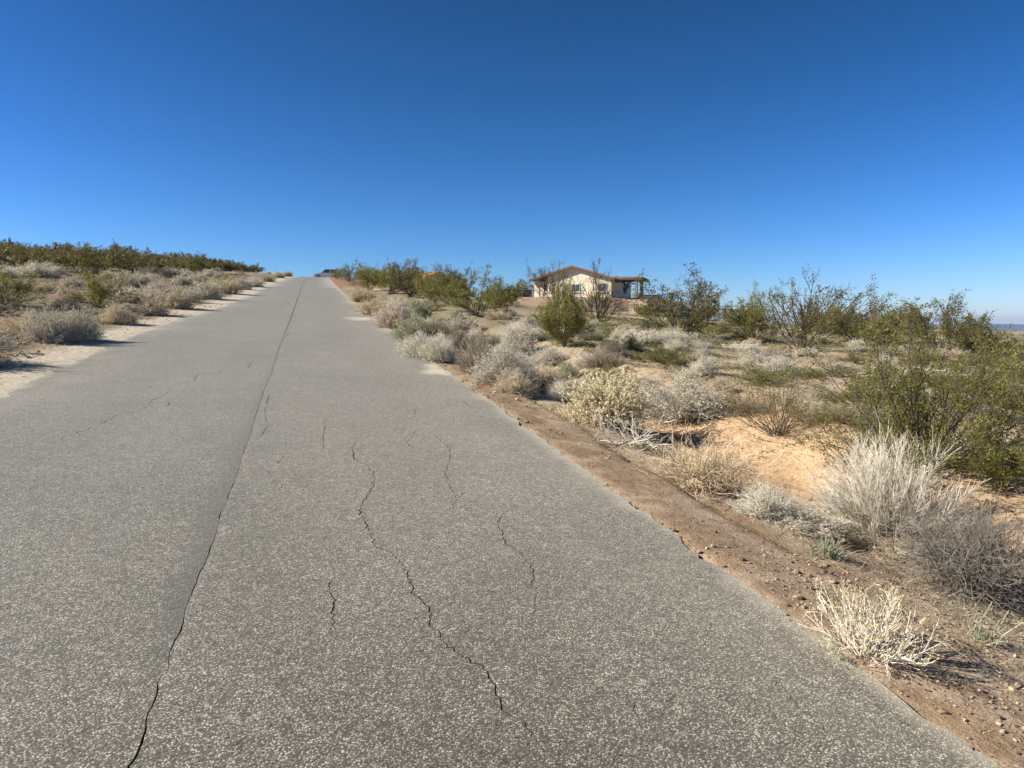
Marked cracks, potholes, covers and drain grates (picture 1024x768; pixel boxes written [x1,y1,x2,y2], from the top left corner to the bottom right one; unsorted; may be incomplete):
crack [351,441,551,768]
crack [327,579,337,636]
